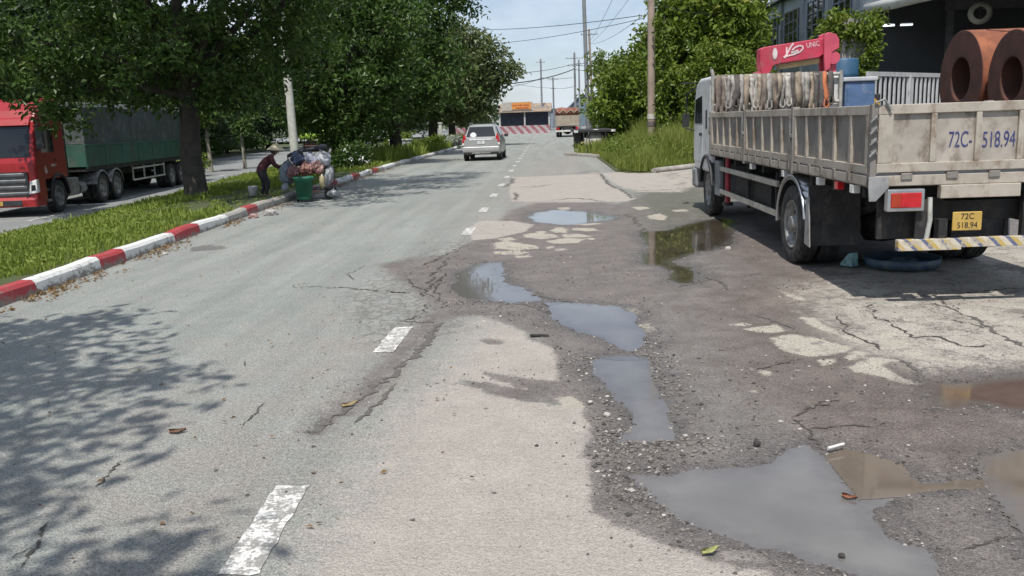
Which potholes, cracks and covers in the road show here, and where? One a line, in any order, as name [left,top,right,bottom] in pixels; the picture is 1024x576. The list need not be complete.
crack [791,399,891,445]
pothole [450,261,560,306]
pothole [523,209,621,225]
pothole [576,352,694,449]
pothole [537,300,658,360]
crack [95,461,121,487]
pothole [610,436,965,576]
pothole [633,217,740,286]
crack [836,300,1024,350]
pothole [905,371,1024,416]
crack [291,244,468,433]
